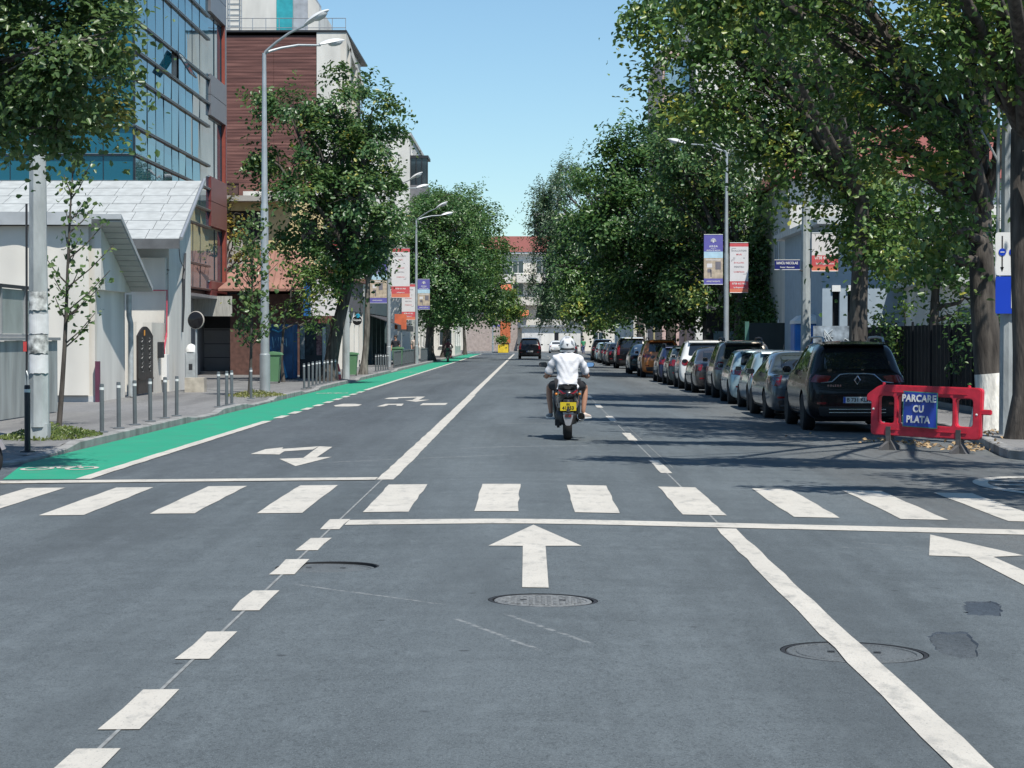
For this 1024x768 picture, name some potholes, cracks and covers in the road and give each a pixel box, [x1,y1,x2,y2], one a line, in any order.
manhole cover [489,594,597,607]
manhole cover [781,642,929,663]
manhole cover [276,562,378,573]
